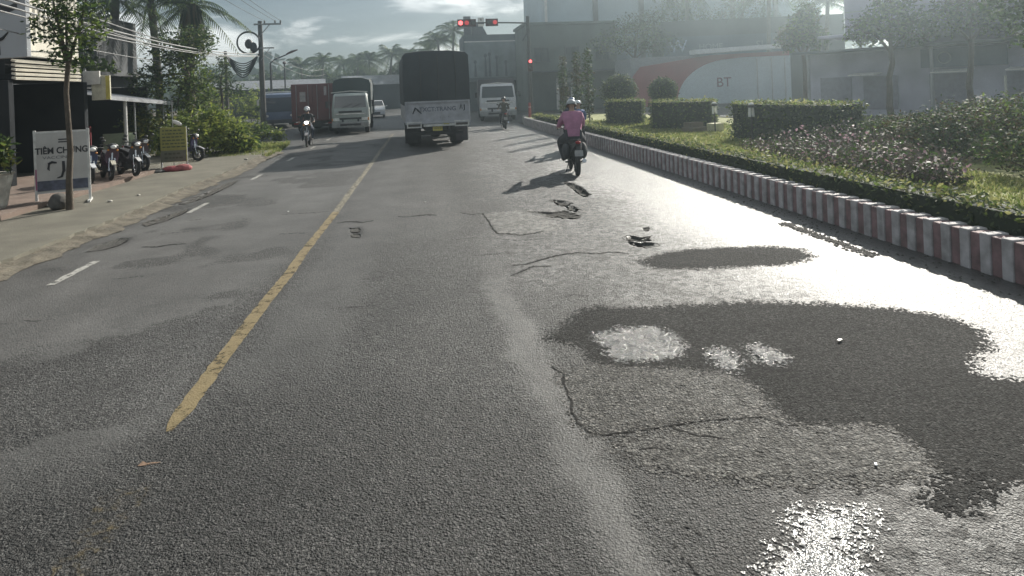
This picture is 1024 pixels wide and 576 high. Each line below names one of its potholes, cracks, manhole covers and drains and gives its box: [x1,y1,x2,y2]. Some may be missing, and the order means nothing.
crack [452,212,626,276]
pothole [529,210,581,219]
crack [552,366,787,449]
pothole [564,182,590,197]
